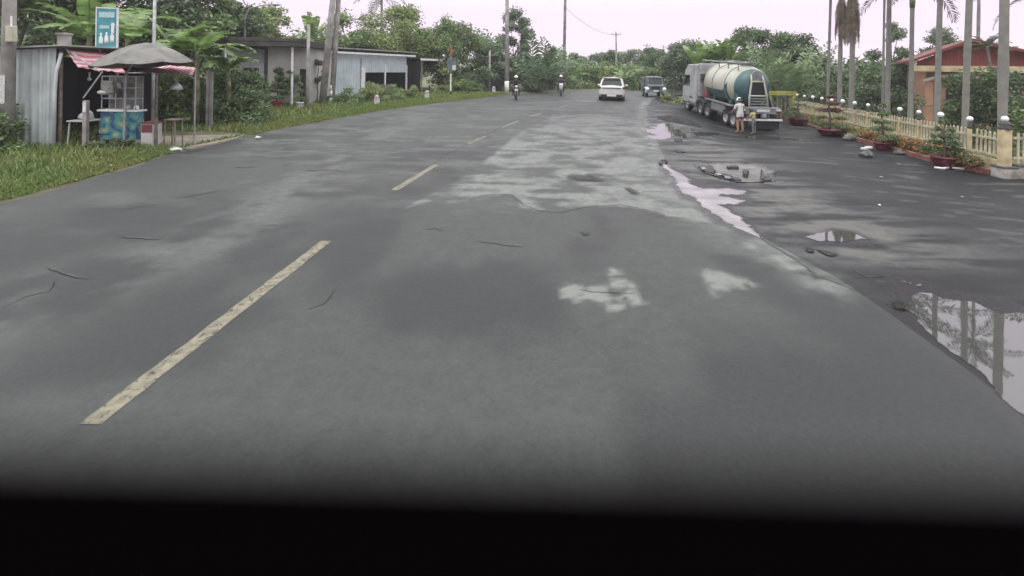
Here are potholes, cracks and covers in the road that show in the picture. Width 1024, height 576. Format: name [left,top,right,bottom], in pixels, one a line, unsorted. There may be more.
pothole [696,162,775,182]
crack [455,194,702,222]
crack [2,267,86,308]
crack [759,235,913,297]
